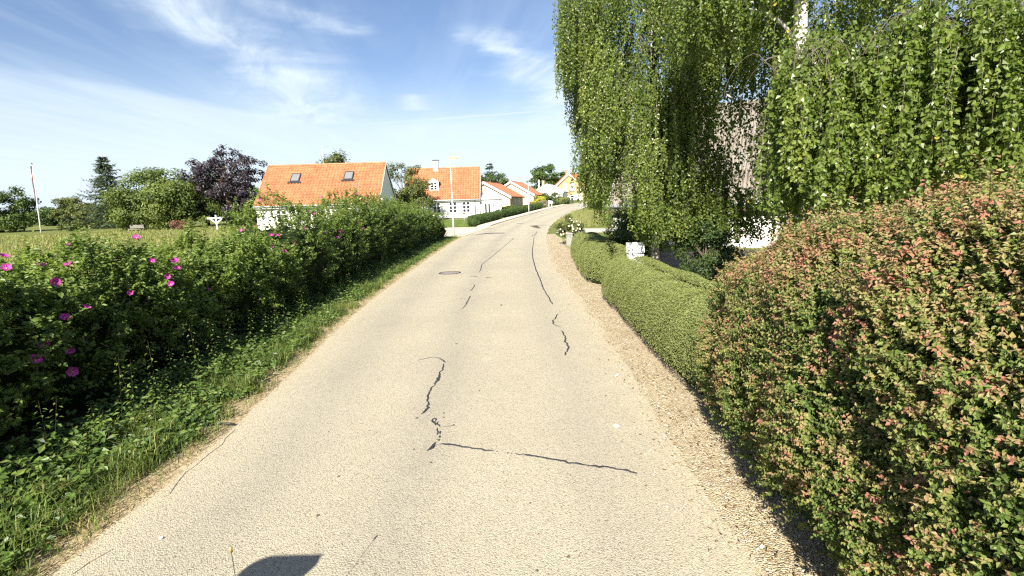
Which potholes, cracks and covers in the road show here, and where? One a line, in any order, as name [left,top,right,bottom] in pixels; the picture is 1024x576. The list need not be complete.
crack [170,430,235,494]
